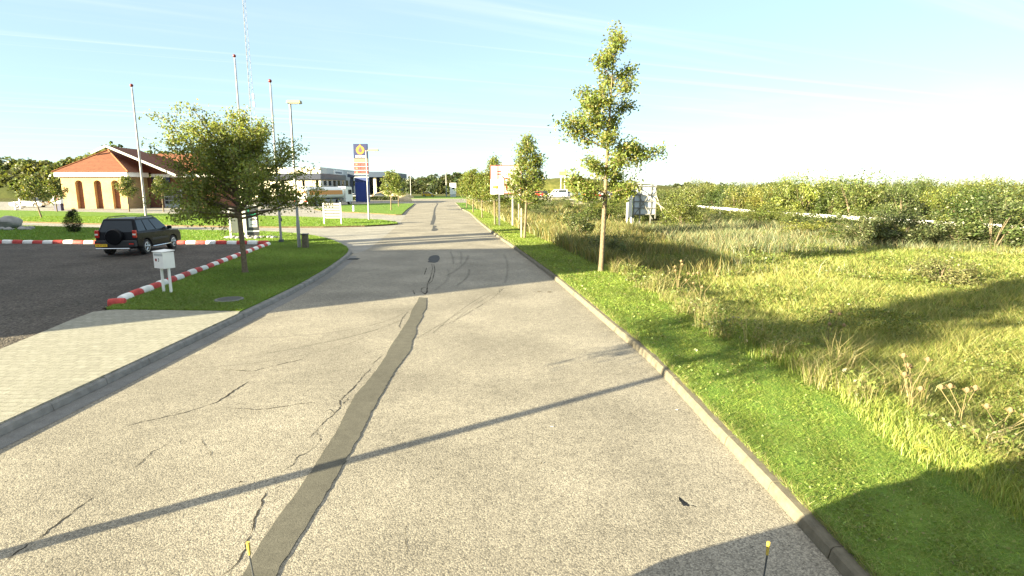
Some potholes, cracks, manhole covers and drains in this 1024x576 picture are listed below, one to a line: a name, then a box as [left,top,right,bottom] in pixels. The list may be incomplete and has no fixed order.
crack [131,347,385,574]
crack [6,493,98,561]
